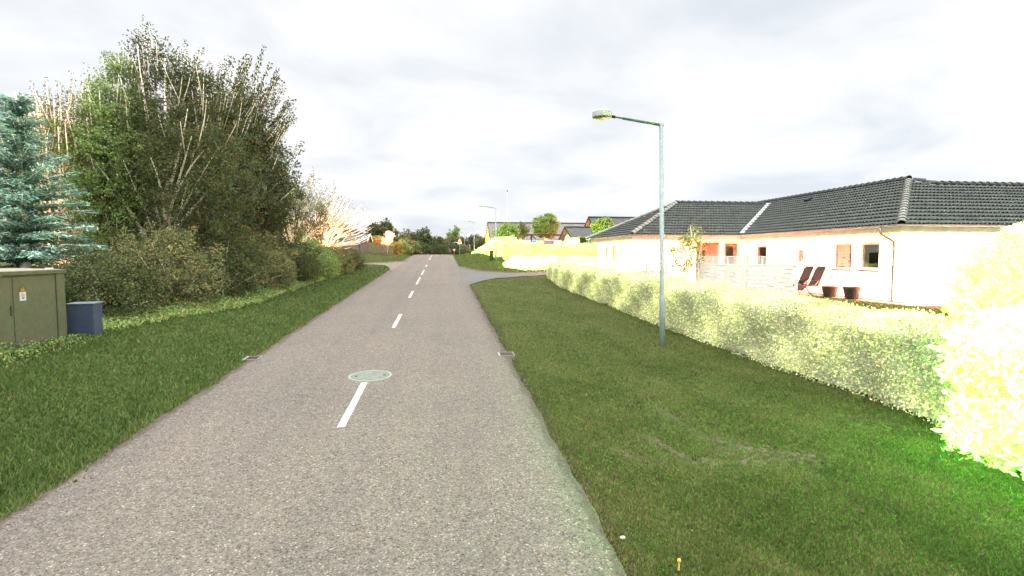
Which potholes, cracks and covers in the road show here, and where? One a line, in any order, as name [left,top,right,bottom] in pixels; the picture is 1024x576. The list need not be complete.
manhole cover [348,370,392,381]
